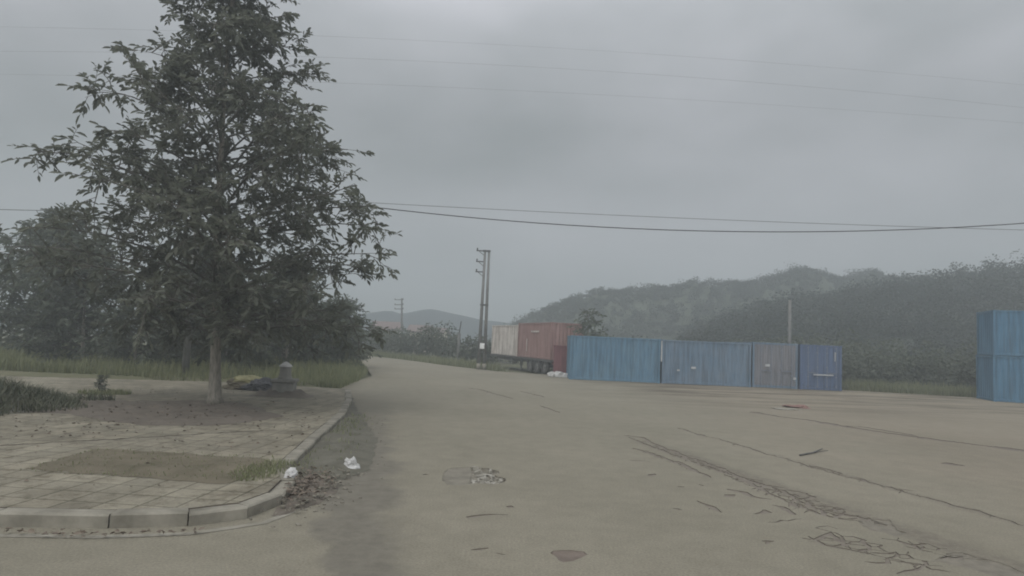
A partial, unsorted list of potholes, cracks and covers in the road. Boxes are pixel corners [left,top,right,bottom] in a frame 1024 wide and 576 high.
pothole [442,467,506,486]
crack [624,428,1024,574]
crack [467,506,513,518]
crack [470,388,556,412]
